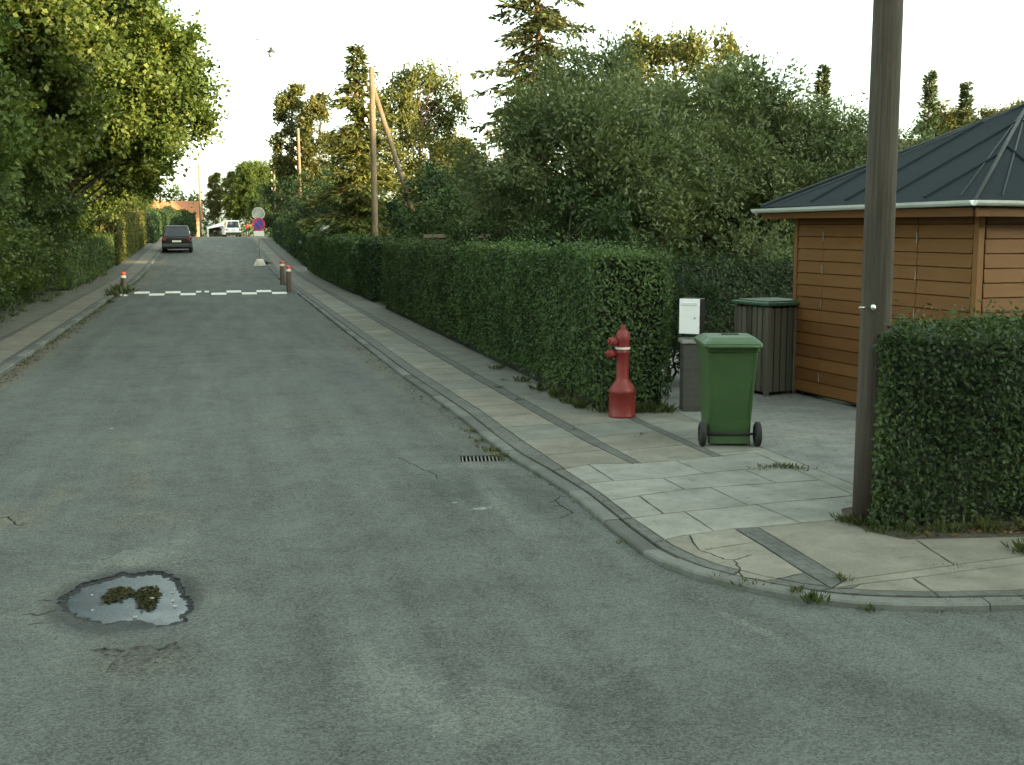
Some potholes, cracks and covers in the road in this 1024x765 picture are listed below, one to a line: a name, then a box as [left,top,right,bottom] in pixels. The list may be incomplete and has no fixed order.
crack [548,496,573,518]
crack [24,599,56,625]
pothole [56,571,194,627]
